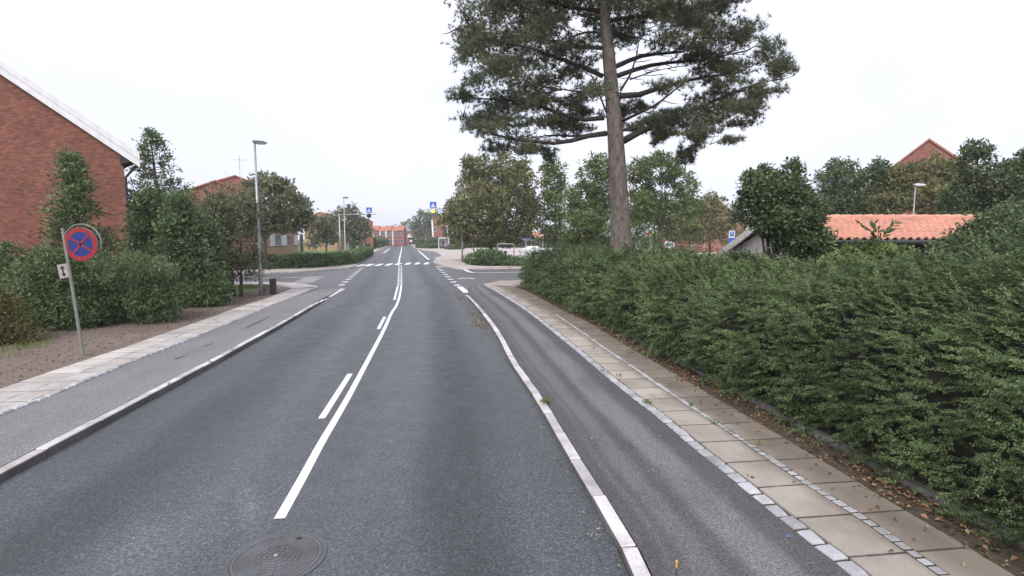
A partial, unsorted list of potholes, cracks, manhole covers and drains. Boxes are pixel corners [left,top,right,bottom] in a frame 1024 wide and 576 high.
manhole cover [223,531,327,576]
